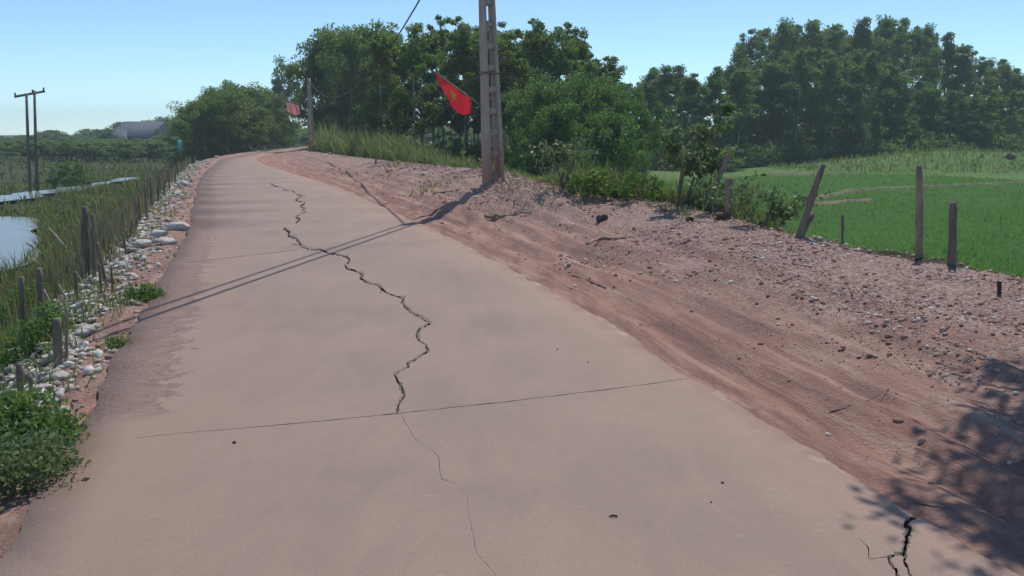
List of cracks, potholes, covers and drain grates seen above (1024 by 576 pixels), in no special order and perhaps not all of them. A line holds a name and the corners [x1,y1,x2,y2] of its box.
crack [859,516,918,576]
crack [270,183,490,568]
